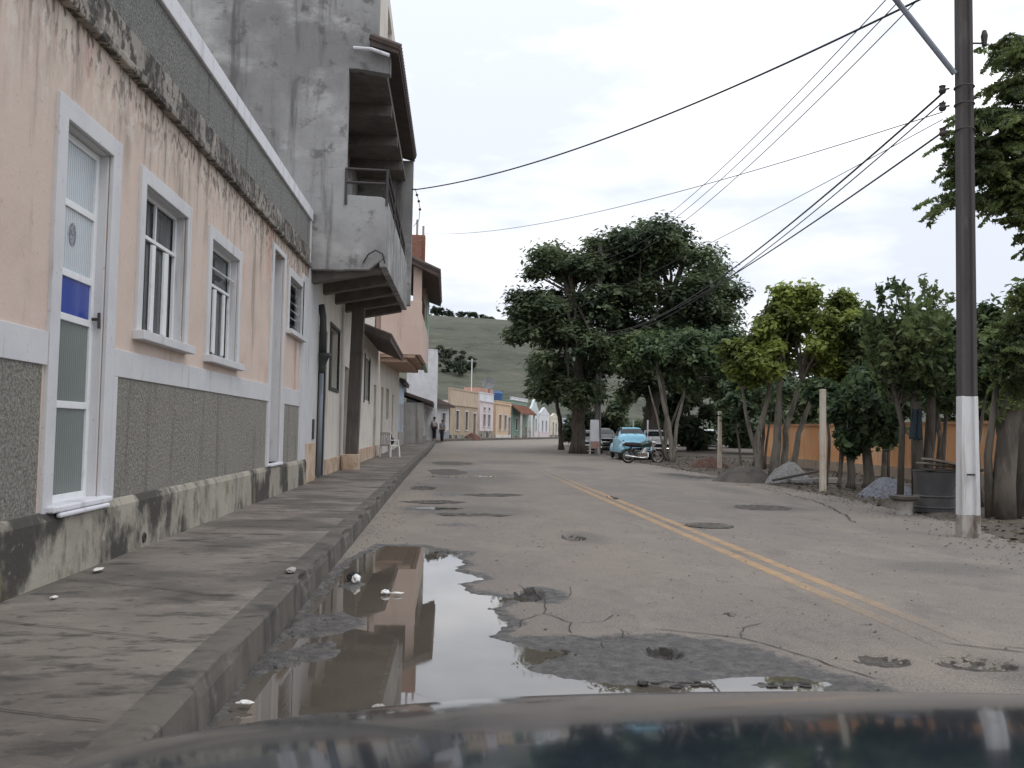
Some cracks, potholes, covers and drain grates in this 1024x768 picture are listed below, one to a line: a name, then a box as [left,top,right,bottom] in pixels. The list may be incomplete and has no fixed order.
crack [520,586,888,681]
pothole [934,657,1020,672]
pothole [513,587,543,602]
pothole [646,647,684,660]
pothole [853,655,911,668]
